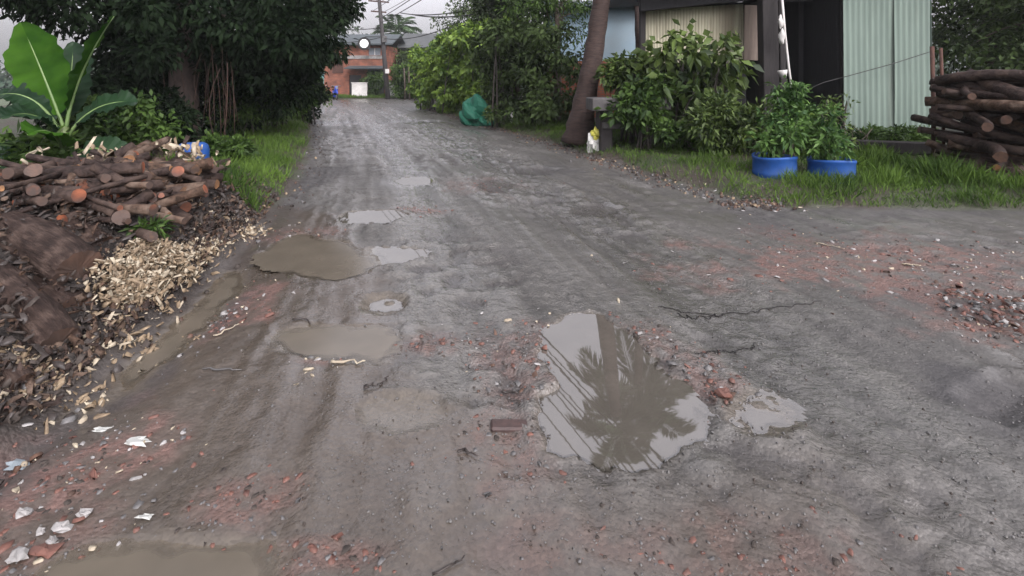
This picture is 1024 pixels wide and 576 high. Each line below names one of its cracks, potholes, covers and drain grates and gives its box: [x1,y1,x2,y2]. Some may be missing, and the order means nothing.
pothole [336,208,413,225]
crack [657,301,816,320]
pothole [29,527,293,576]
pothole [529,309,718,473]
crack [694,342,755,354]
pothole [715,385,812,440]
pothole [355,291,412,316]
pothole [264,321,403,366]
pothole [394,176,436,187]
pothole [360,245,433,265]
pothole [250,232,381,282]
